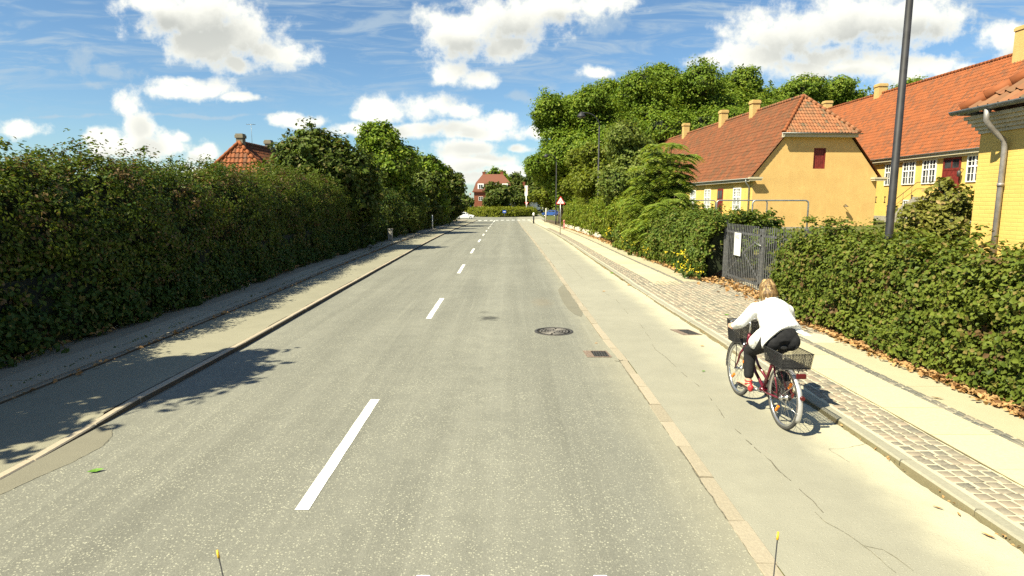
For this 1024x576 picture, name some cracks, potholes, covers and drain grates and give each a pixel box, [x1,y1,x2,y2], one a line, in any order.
crack [617,301,911,572]
manhole cover [534,327,573,336]
